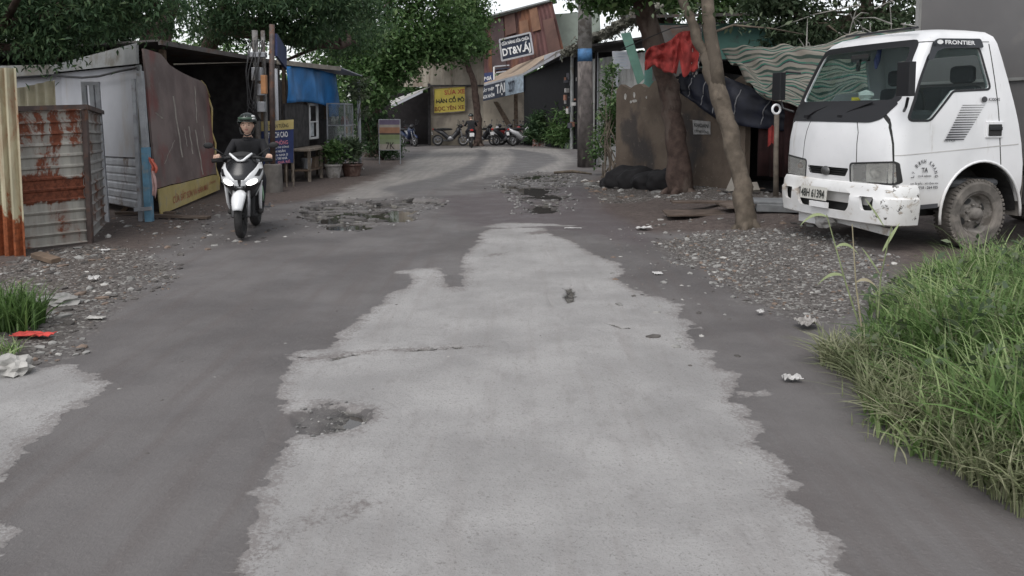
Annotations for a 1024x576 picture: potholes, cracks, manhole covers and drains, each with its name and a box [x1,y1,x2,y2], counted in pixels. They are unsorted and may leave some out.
crack [272,339,510,370]
pothole [276,197,462,236]
pothole [259,394,402,449]
pothole [476,171,590,217]
